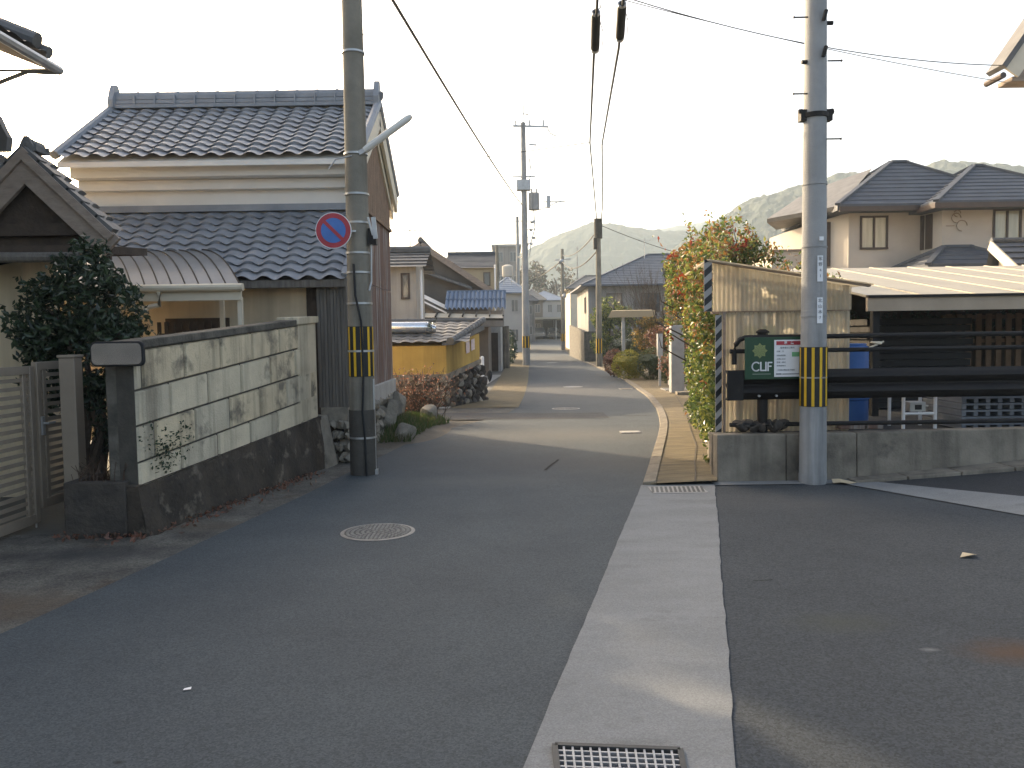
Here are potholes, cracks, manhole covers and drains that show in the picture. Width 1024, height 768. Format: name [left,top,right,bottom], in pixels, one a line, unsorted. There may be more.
manhole cover [340,523,415,541]
drain grate [552,742,687,768]
